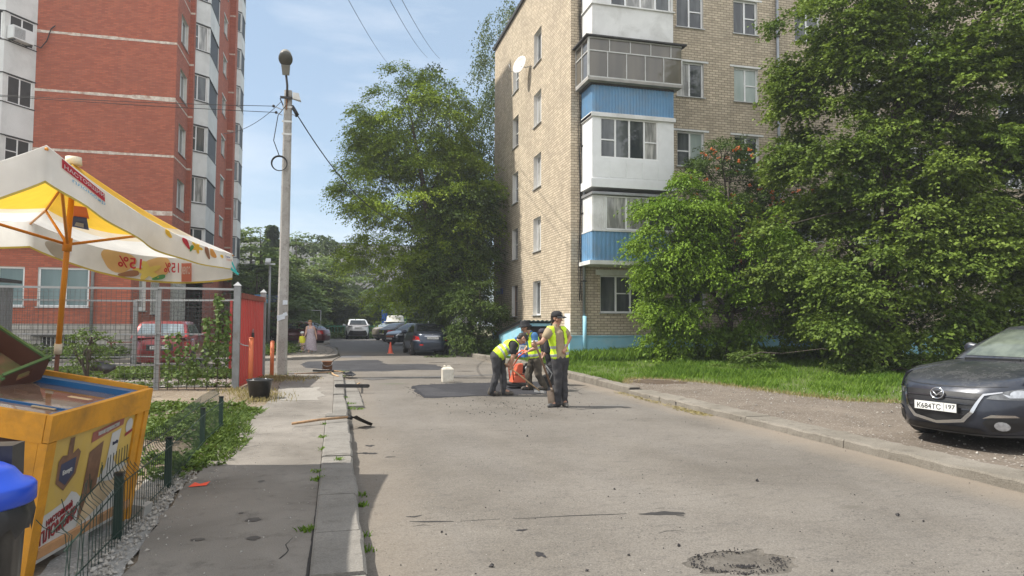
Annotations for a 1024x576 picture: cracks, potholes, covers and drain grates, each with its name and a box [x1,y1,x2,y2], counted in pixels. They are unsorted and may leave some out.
pothole [681,547,799,576]
